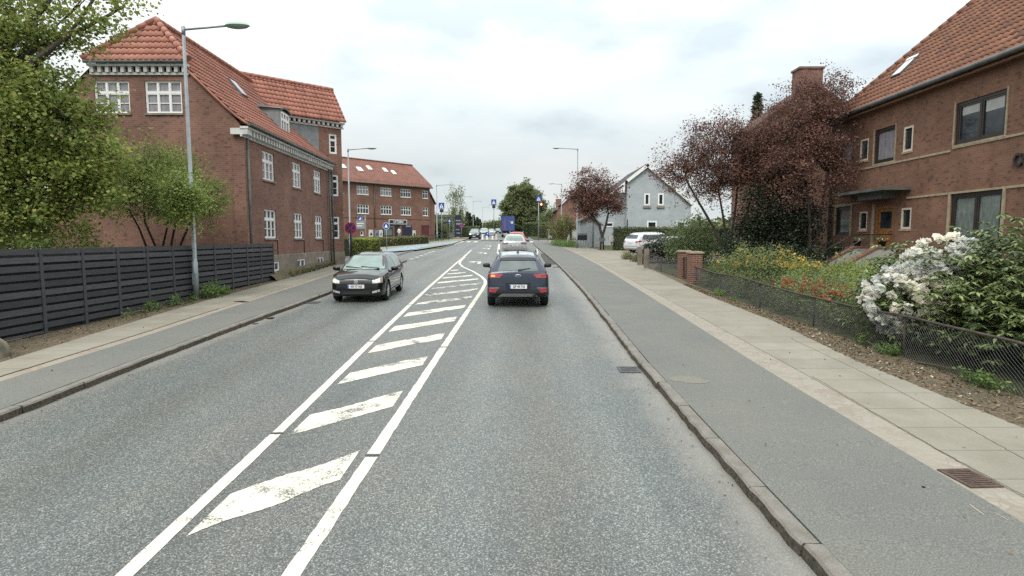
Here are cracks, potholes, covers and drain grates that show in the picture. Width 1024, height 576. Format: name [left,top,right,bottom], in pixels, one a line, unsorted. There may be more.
drain grate [937,468,1004,488]
